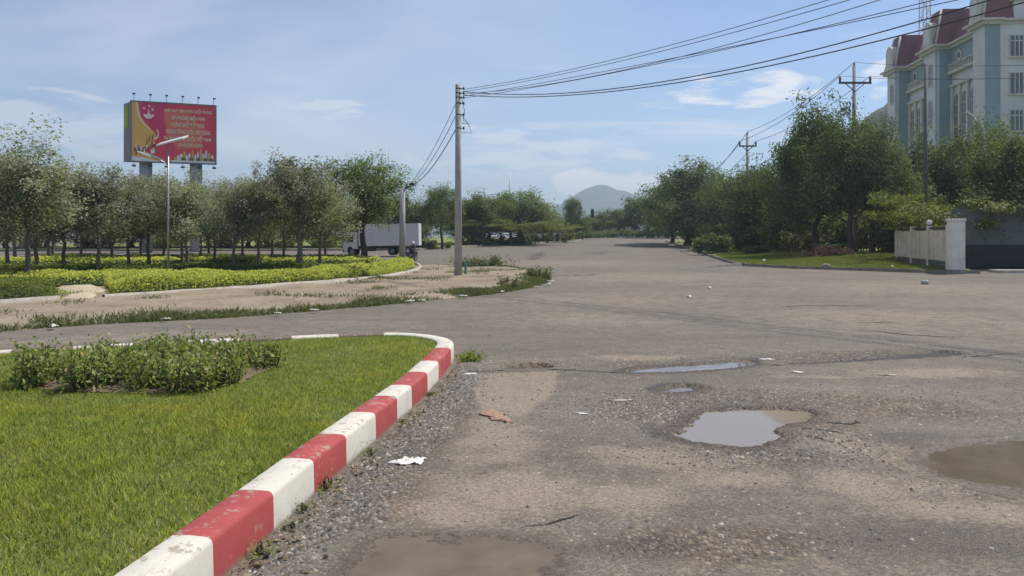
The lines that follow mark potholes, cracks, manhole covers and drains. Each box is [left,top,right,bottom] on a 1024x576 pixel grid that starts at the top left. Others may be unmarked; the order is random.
crack [520,514,578,528]
pothole [317,523,598,576]
pothole [885,431,1024,500]
pothole [612,358,770,375]
pothole [650,405,834,452]
pothole [646,382,718,396]
